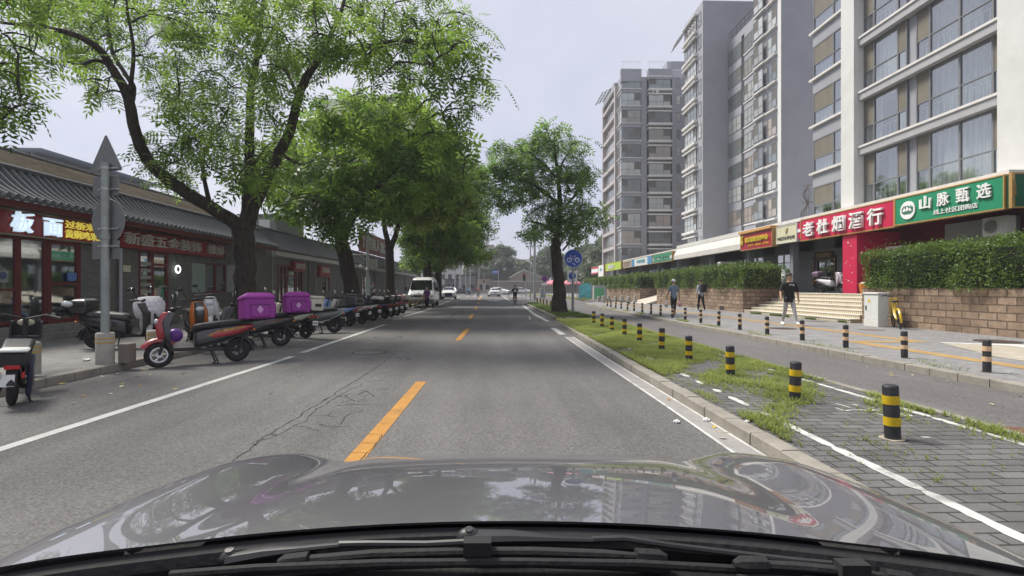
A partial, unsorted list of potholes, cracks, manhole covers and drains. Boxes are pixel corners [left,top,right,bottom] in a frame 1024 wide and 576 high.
crack [233,337,413,461]
